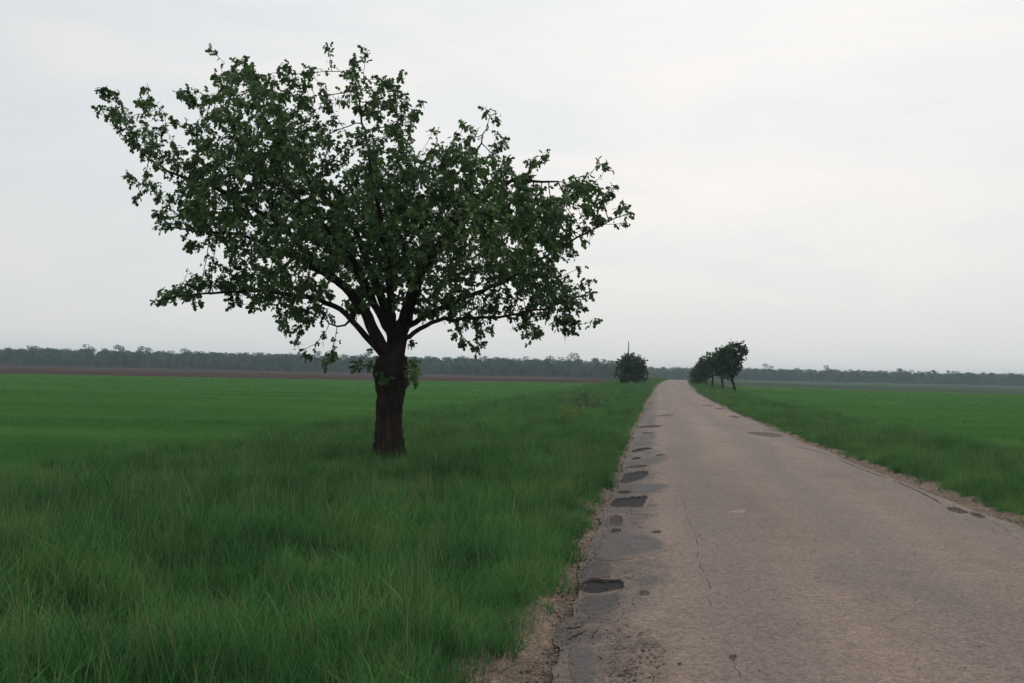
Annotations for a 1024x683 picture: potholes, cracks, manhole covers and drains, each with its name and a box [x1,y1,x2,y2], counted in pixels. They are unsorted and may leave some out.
pothole [619,471,648,483]
pothole [610,495,648,507]
pothole [578,578,625,593]
